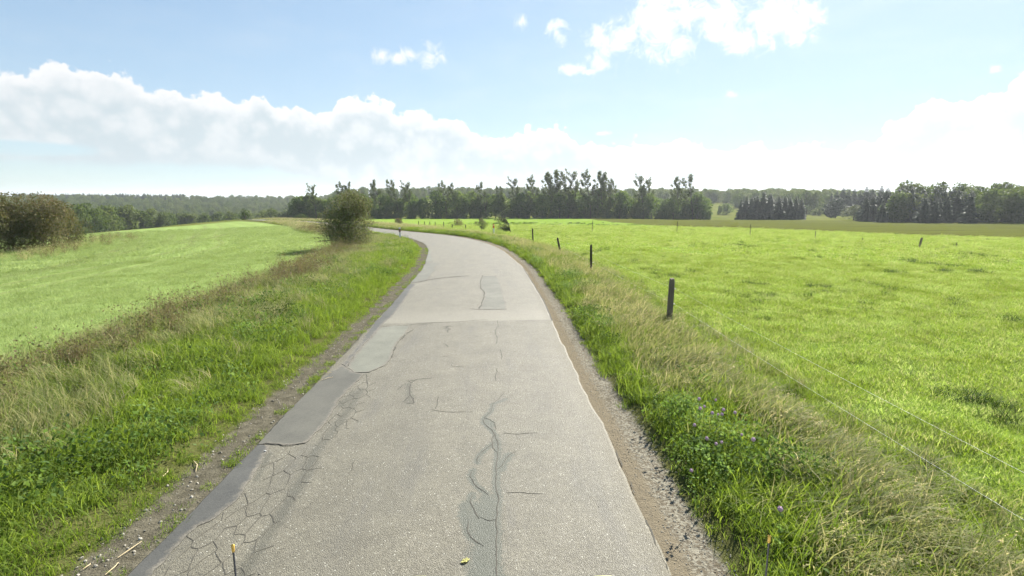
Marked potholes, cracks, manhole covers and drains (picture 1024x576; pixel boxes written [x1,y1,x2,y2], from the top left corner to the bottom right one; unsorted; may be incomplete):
crack [164,375,376,576]
crack [398,378,429,403]
